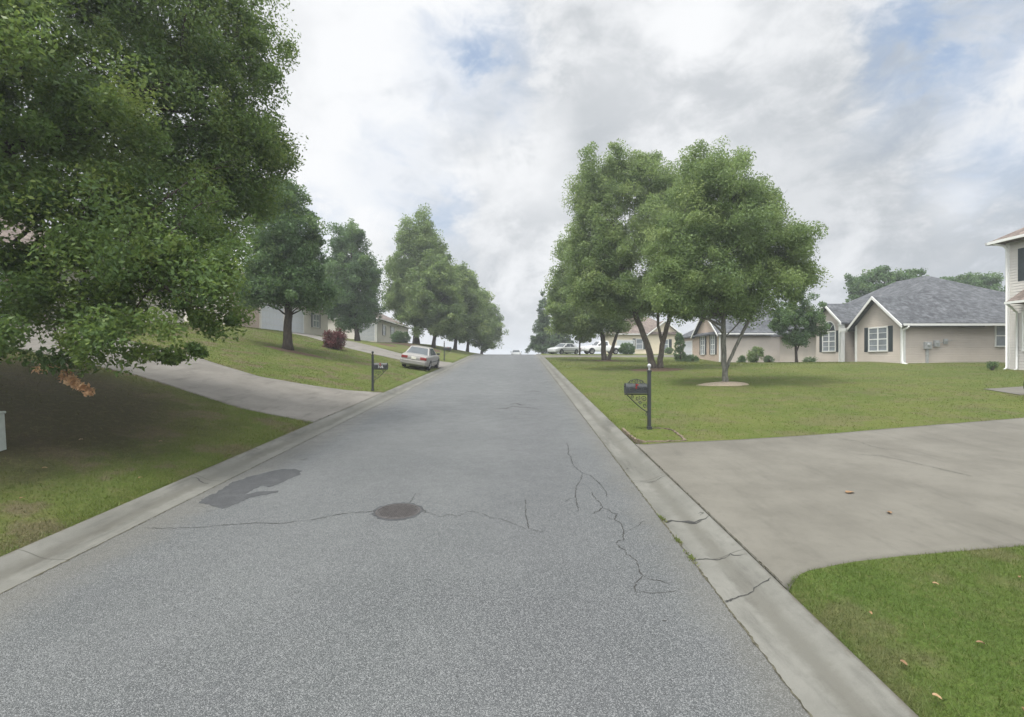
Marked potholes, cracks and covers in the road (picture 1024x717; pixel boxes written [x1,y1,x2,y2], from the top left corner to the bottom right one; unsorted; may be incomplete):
crack [724,578,770,602]
manhole cover [372,502,424,520]
crack [169,511,371,528]
crack [566,448,673,593]
crack [666,512,708,524]
crack [409,493,537,531]
